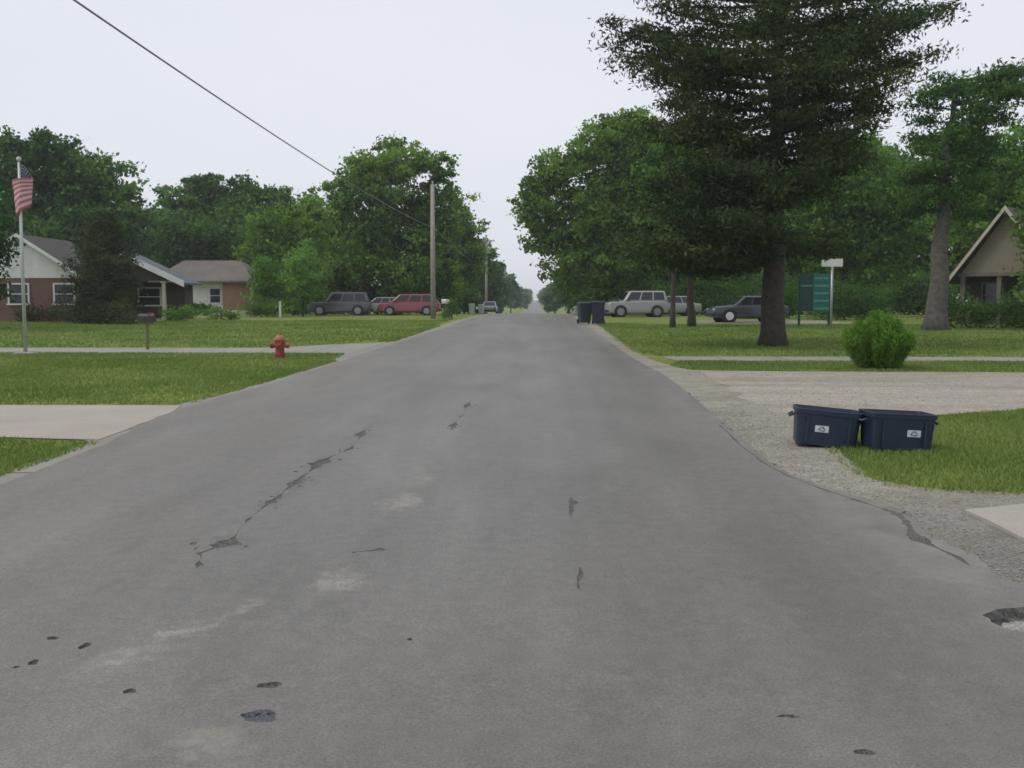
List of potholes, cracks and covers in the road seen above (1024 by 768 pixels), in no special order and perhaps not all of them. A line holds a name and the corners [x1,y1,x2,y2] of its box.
crack [442,400,482,431]
crack [568,497,579,516]
pothole [240,709,276,722]
pothole [983,607,1024,632]
